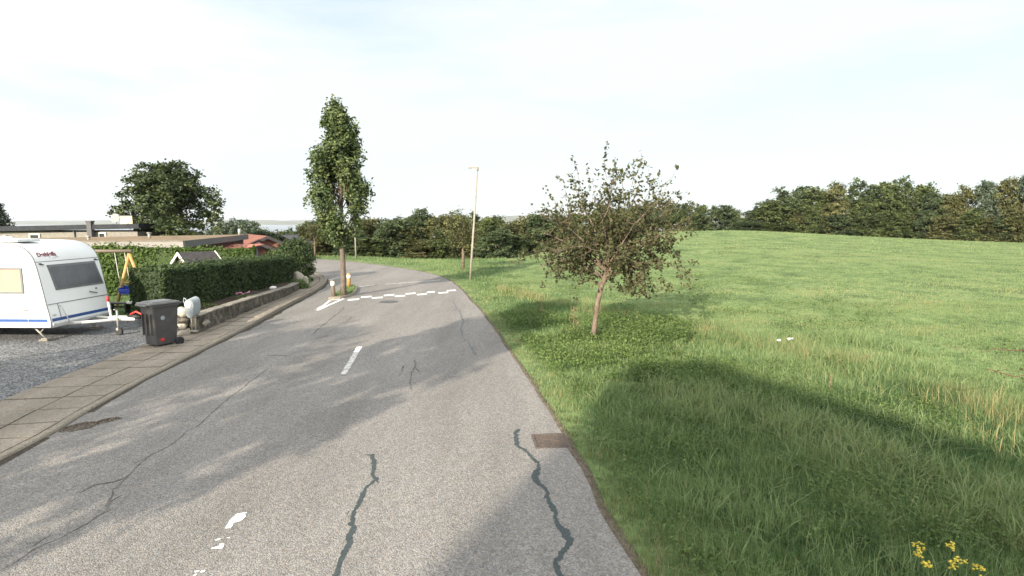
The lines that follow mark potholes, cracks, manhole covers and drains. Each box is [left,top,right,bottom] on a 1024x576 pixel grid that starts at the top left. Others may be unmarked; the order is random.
crack [16,355,288,562]
pothole [59,417,122,433]
drain grate [531,433,571,449]
crack [452,301,477,356]
crack [400,359,421,390]
